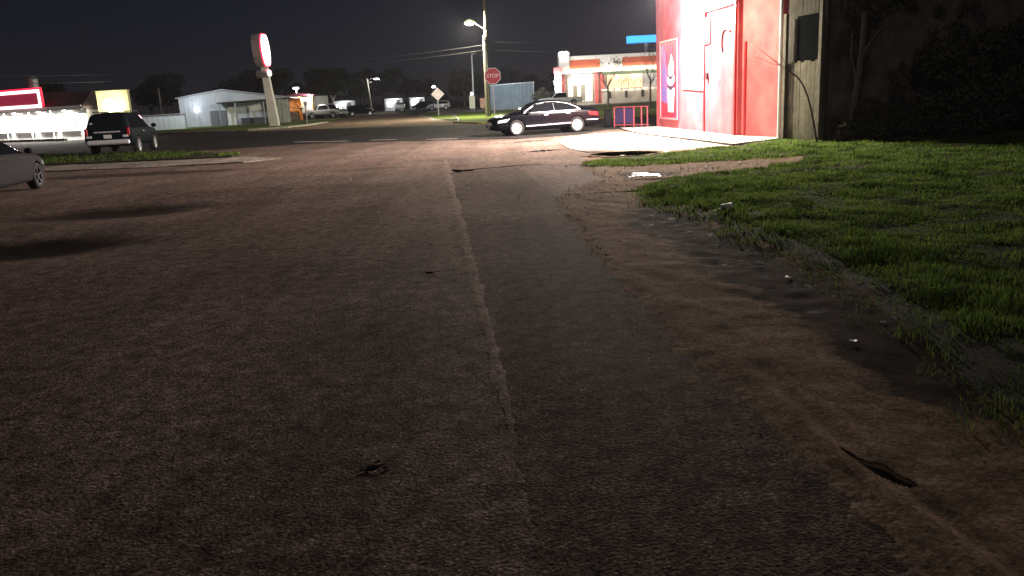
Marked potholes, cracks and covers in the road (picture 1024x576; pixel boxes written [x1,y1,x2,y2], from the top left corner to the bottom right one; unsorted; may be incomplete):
crack [441,160,515,439]
pothole [356,460,392,475]
